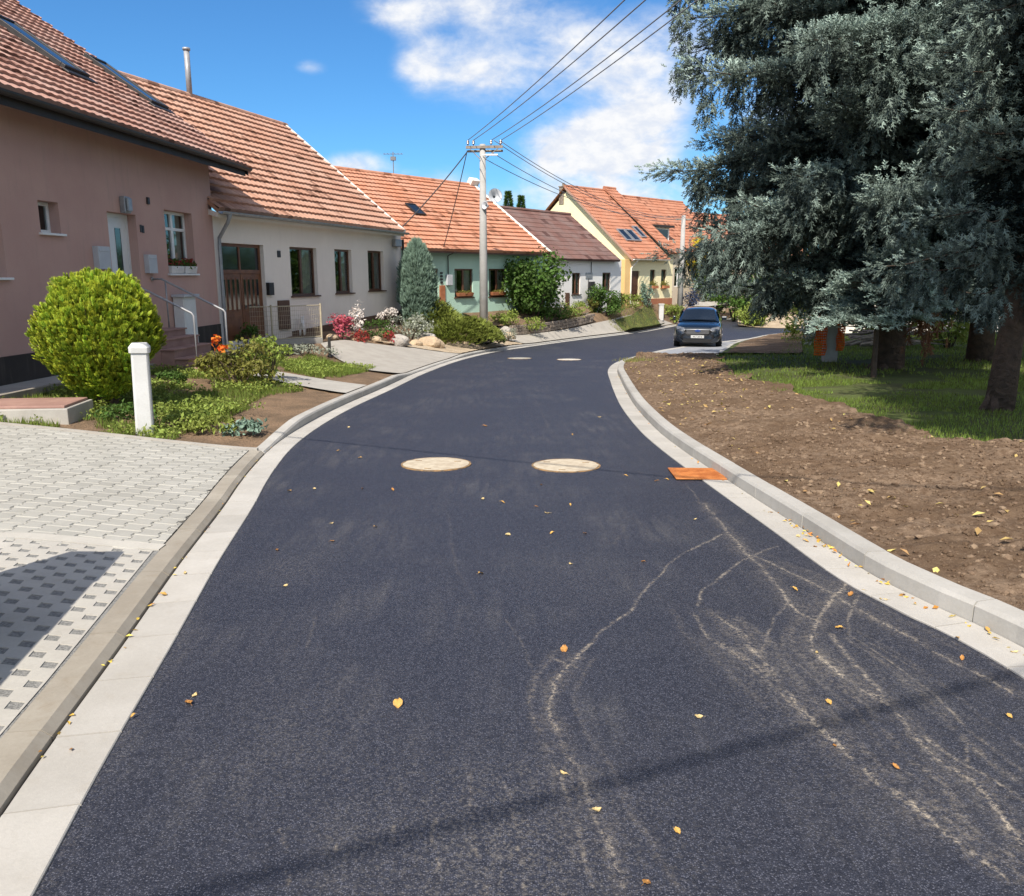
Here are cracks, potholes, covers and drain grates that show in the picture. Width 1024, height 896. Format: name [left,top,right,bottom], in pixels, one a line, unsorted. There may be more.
manhole cover [401,457,471,471]
manhole cover [532,459,601,473]
